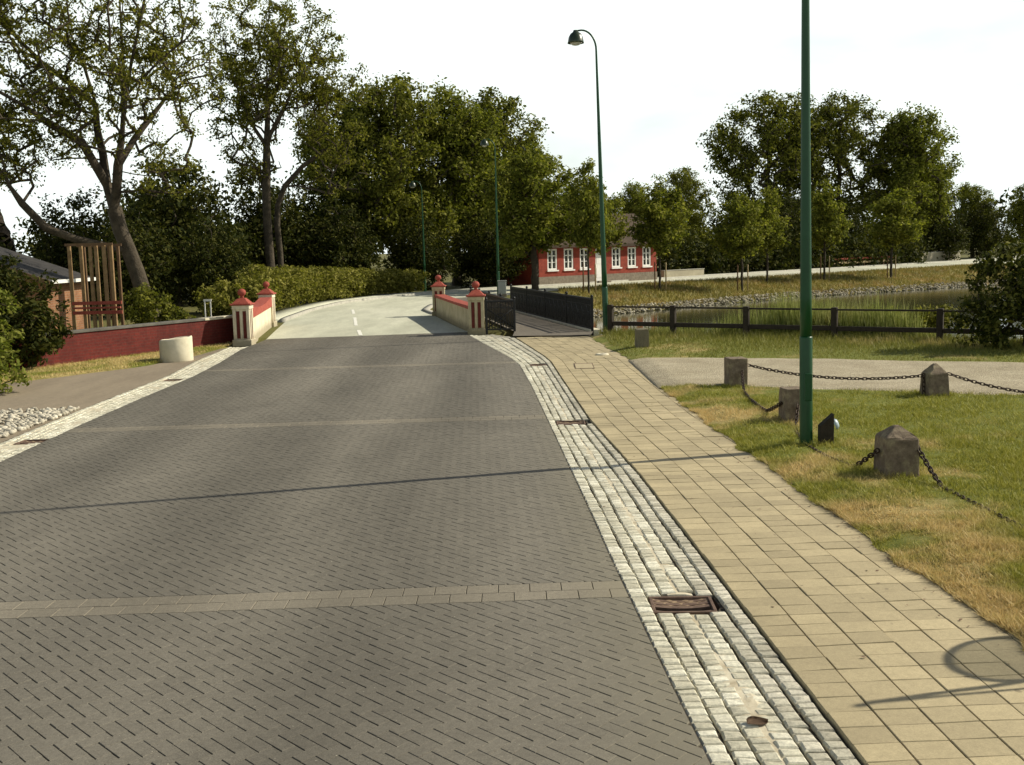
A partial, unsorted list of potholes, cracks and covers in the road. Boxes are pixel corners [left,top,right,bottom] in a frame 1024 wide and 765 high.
drain grate [648,596,718,617]
